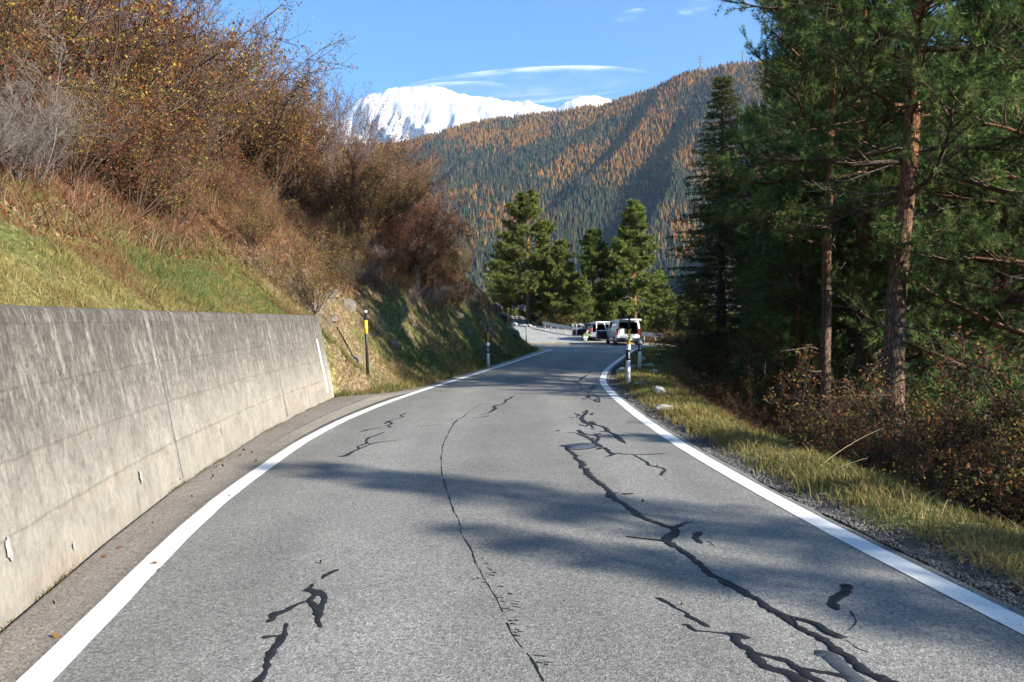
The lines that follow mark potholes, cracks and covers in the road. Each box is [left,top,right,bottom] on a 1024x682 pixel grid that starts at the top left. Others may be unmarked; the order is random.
crack [424,405,553,681]
